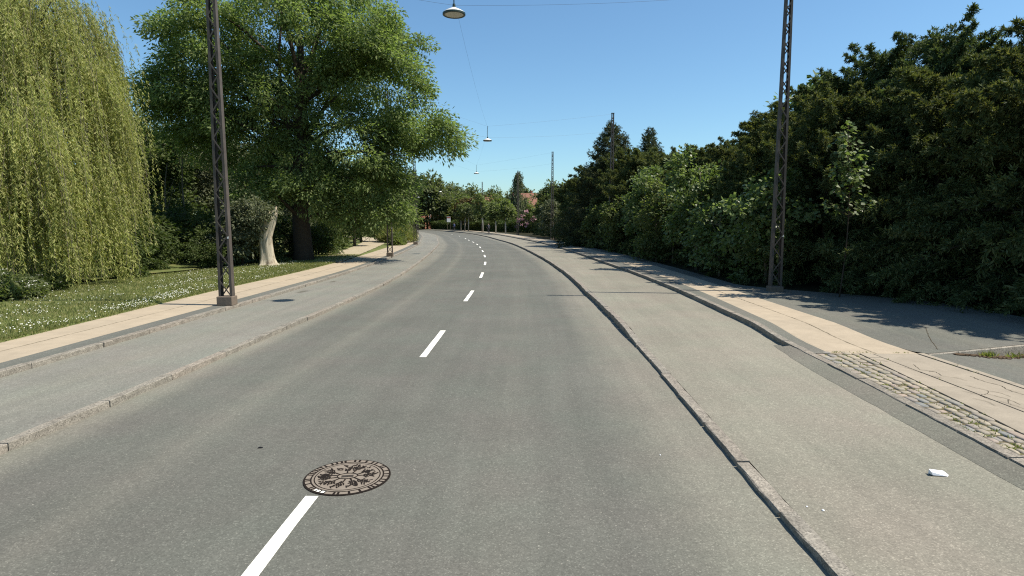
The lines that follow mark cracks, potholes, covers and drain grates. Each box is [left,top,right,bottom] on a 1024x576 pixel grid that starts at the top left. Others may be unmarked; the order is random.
manhole cover [303,460,391,496]
